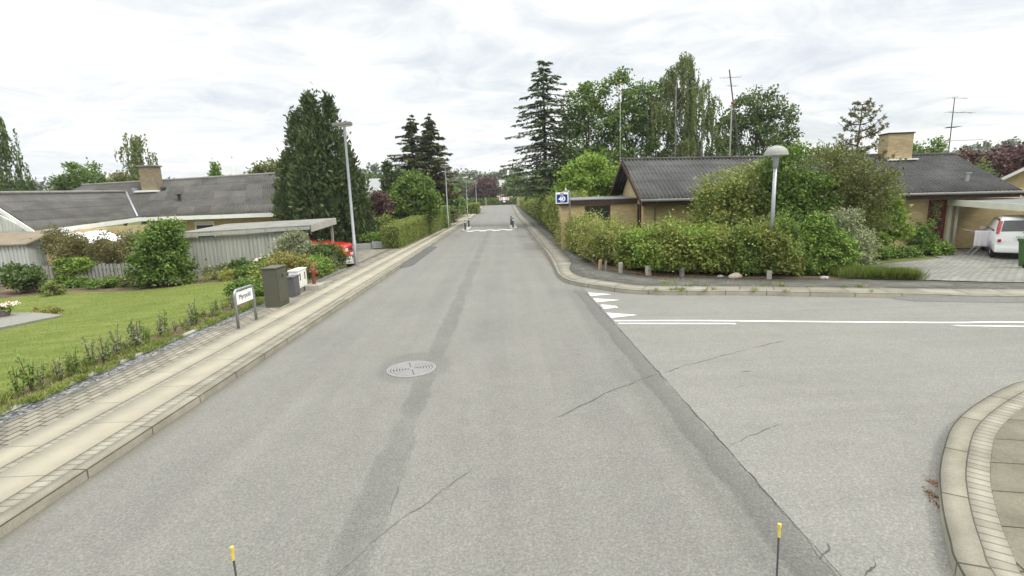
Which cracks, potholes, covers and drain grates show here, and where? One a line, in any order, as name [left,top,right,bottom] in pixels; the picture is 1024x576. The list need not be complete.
crack [335,459,471,576]
manhole cover [386,361,436,377]
